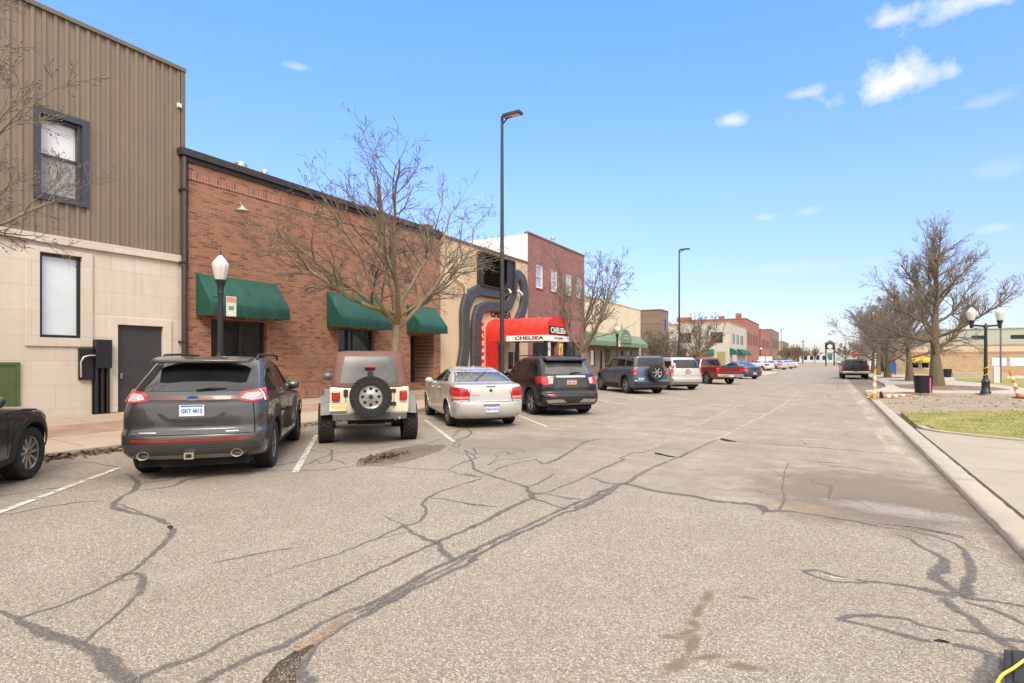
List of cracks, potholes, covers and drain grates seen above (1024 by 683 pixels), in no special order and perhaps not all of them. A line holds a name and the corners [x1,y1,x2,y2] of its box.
crack [302,429,525,466]
crack [209,546,306,564]
pothole [262,644,314,683]
pothole [356,444,446,467]
crack [747,435,1024,650]
